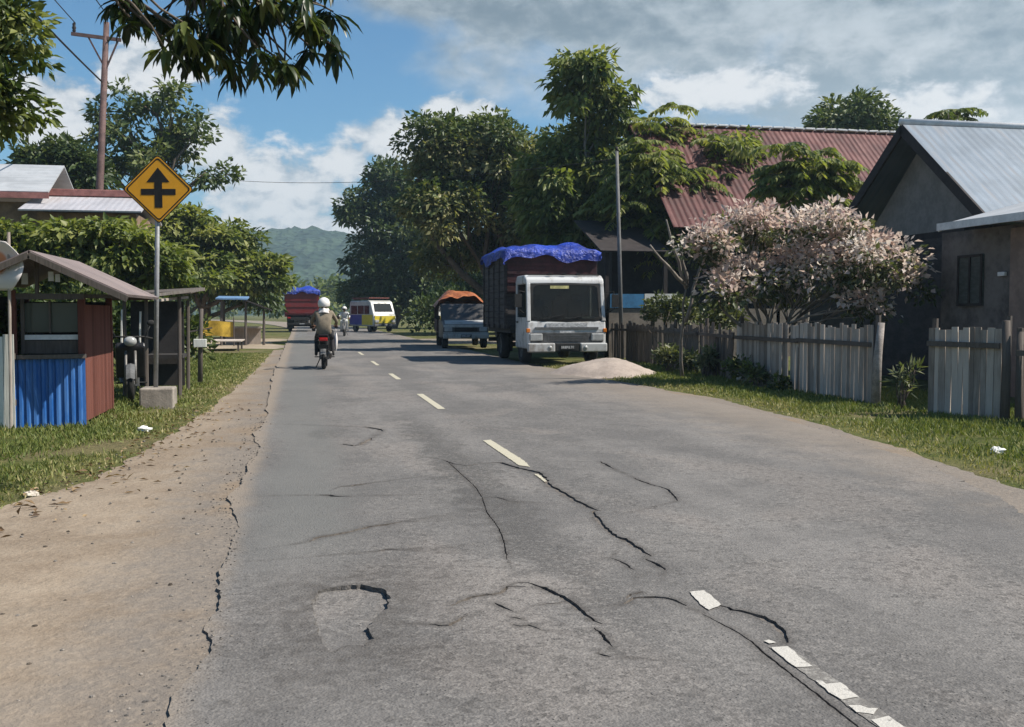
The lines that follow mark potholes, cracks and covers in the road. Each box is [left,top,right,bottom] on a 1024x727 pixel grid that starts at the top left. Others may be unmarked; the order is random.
crack [623,592,859,727]
crack [429,461,678,657]
pothole [311,584,391,652]
crack [309,522,399,552]
crack [343,427,383,446]
